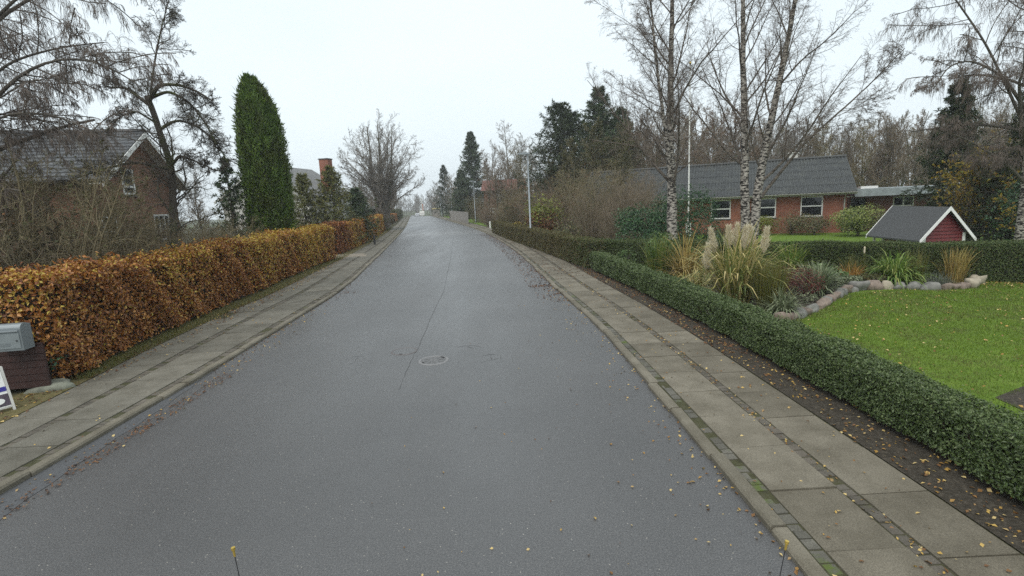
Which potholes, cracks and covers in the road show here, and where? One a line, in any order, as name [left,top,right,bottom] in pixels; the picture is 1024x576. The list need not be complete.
manhole cover [418,356,449,365]
